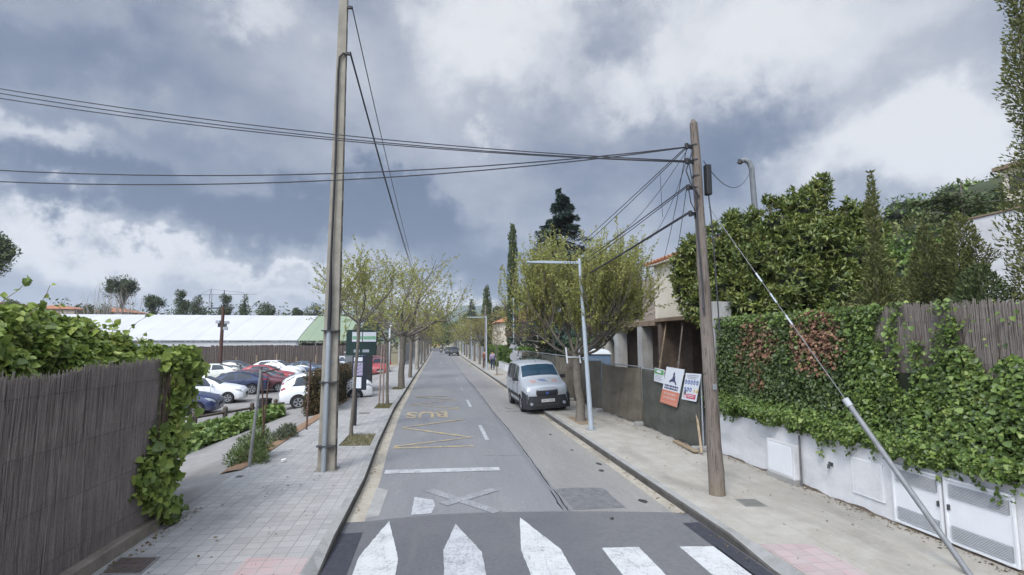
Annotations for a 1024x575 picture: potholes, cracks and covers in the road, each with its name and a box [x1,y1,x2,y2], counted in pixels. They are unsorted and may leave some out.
manhole cover [735,499,768,507]
manhole cover [99,556,161,575]
